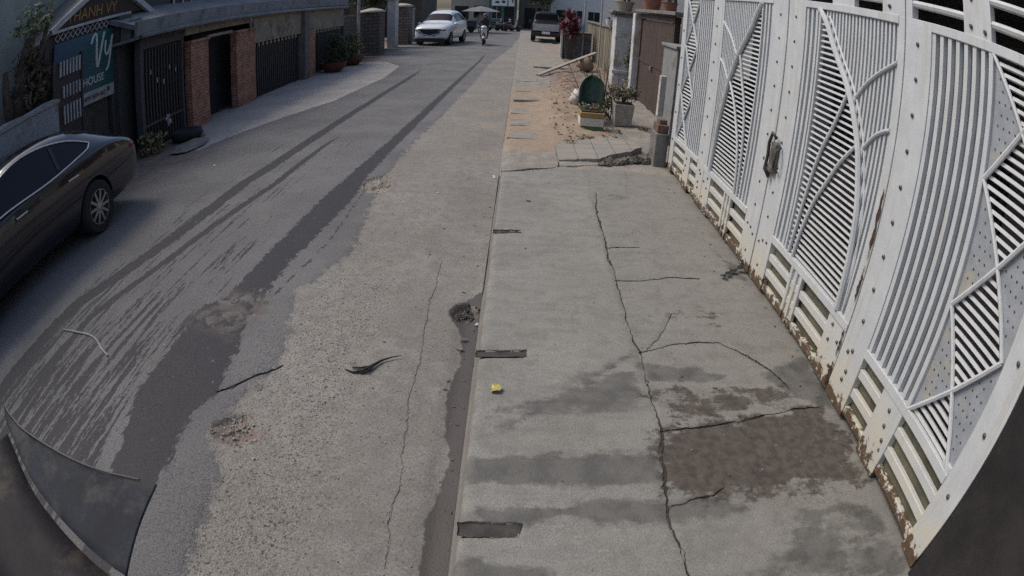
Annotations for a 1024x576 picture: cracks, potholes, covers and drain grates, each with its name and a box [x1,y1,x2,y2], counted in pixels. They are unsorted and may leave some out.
pothole [448,303,480,325]
crack [384,263,442,568]
pothole [362,176,395,195]
pothole [209,412,263,446]
crack [216,365,283,392]
crack [595,194,825,576]
